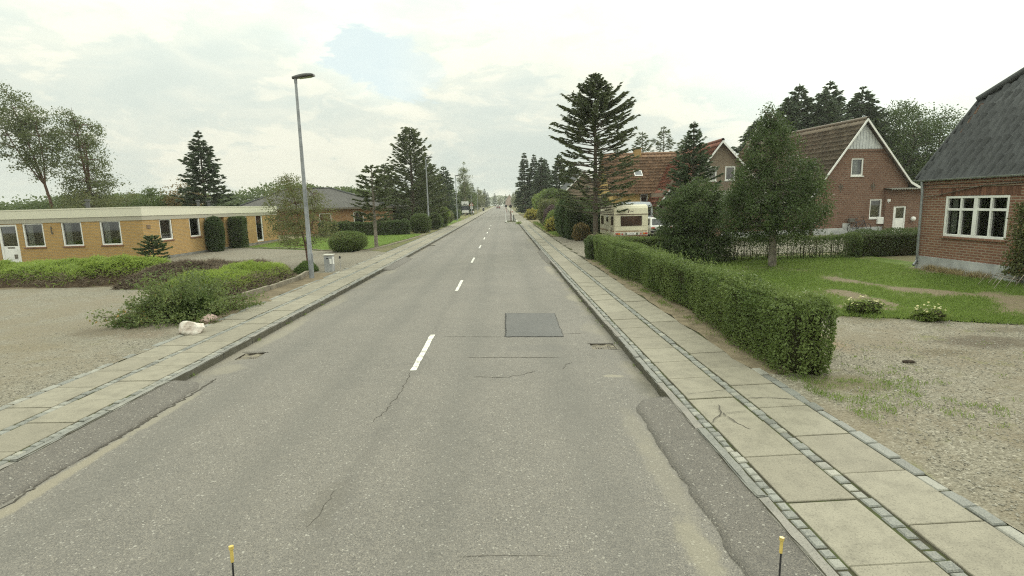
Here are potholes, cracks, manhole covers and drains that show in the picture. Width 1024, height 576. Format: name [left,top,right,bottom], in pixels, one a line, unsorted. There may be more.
crack [468,357,572,378]
